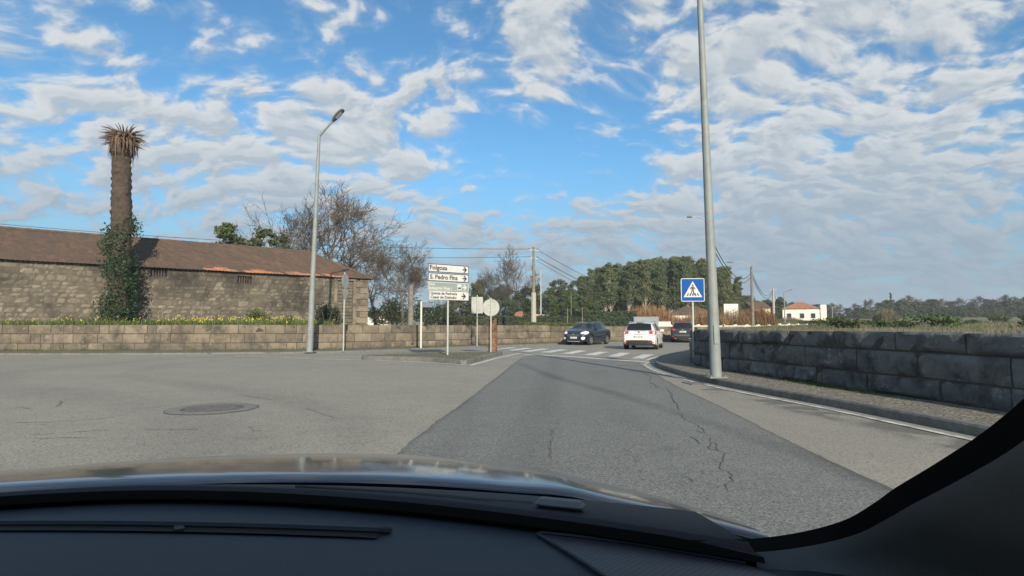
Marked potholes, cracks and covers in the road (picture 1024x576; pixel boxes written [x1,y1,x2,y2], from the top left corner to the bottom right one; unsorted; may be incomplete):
crack [535,408,723,494]
manhole cover [163,403,259,415]
crack [682,416,744,491]
